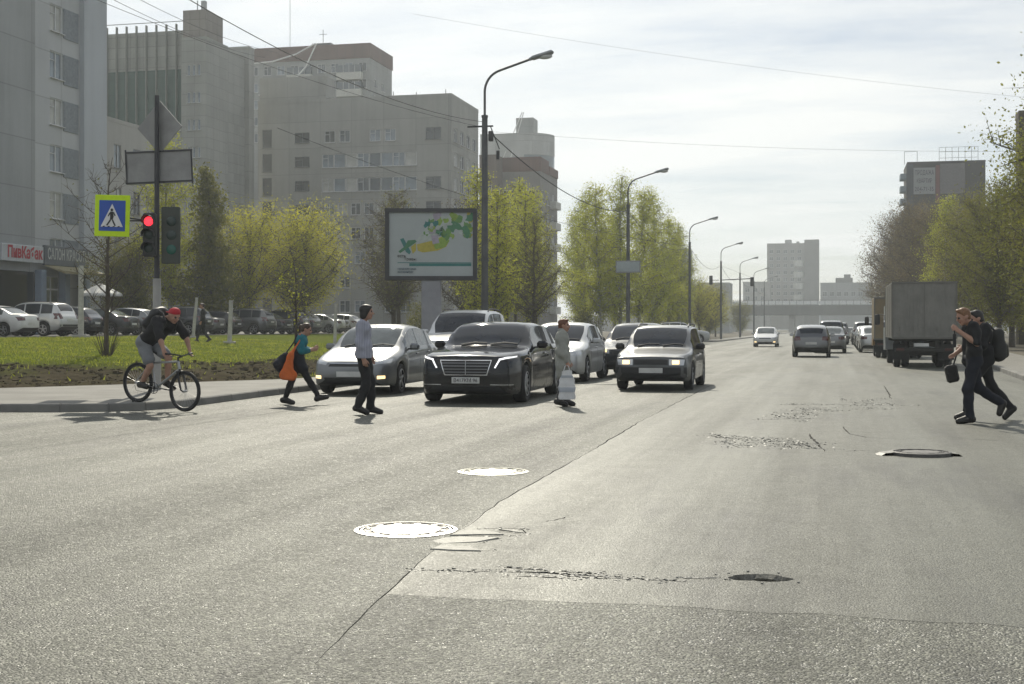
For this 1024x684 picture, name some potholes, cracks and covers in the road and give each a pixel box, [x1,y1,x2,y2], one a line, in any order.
manhole cover [354,522,458,538]
crack [704,387,999,452]
manhole cover [876,449,961,458]
manhole cover [457,467,529,476]
